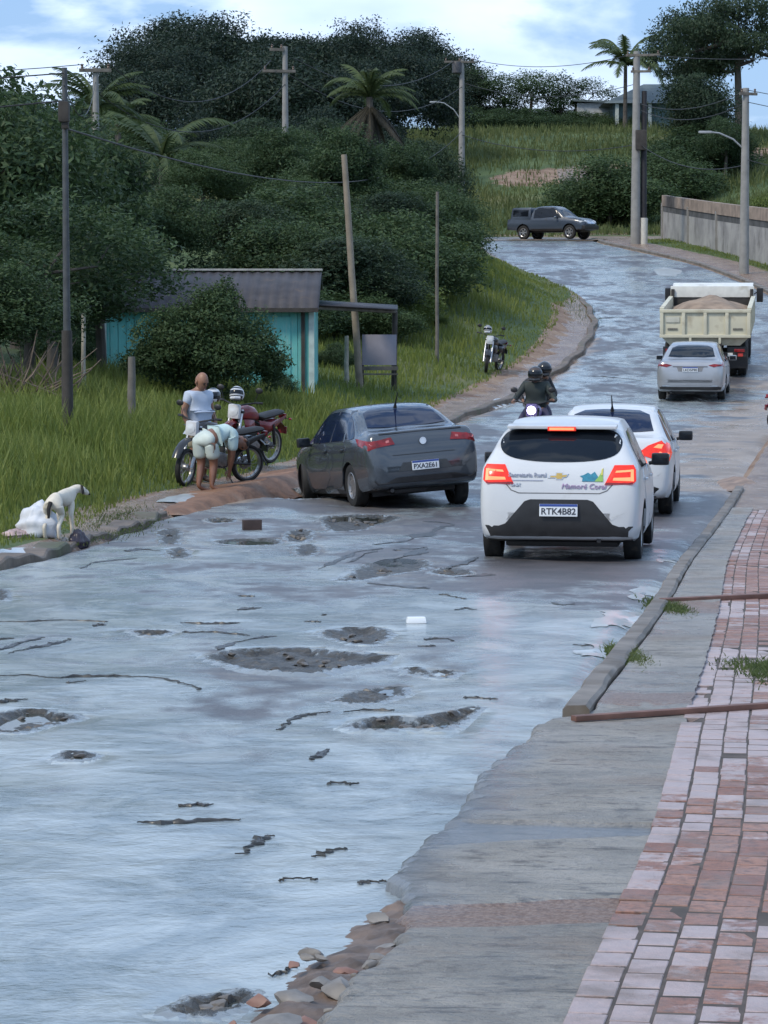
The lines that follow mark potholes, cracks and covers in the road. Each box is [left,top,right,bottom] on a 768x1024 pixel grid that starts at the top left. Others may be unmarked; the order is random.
pothole [46,750,106,765]
crack [0,619,108,654]
pothole [316,514,402,533]
pothole [324,686,419,706]
pothole [332,705,491,735]
pothole [279,528,321,544]
crack [0,674,202,703]
pothole [0,708,93,735]
pothole [195,647,398,677]
pothole [142,987,271,1023]
pothole [312,626,399,646]
crack [137,802,275,854]
